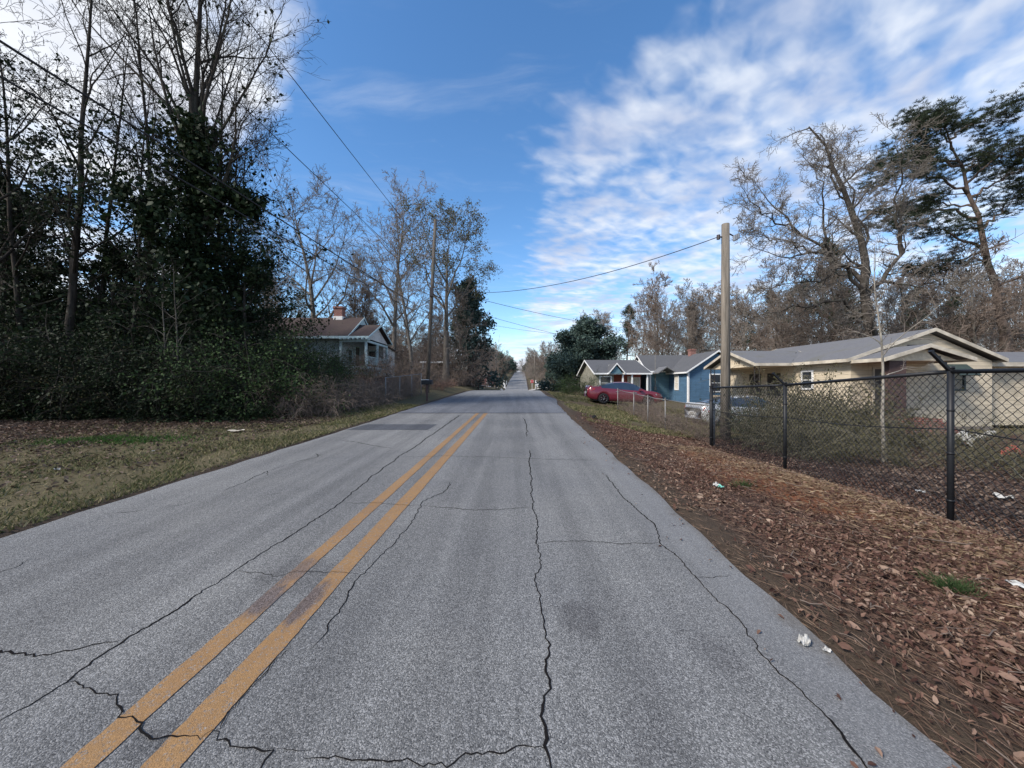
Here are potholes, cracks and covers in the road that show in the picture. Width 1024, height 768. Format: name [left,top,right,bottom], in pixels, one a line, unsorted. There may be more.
crack [606,475,868,768]
crack [0,415,630,768]
